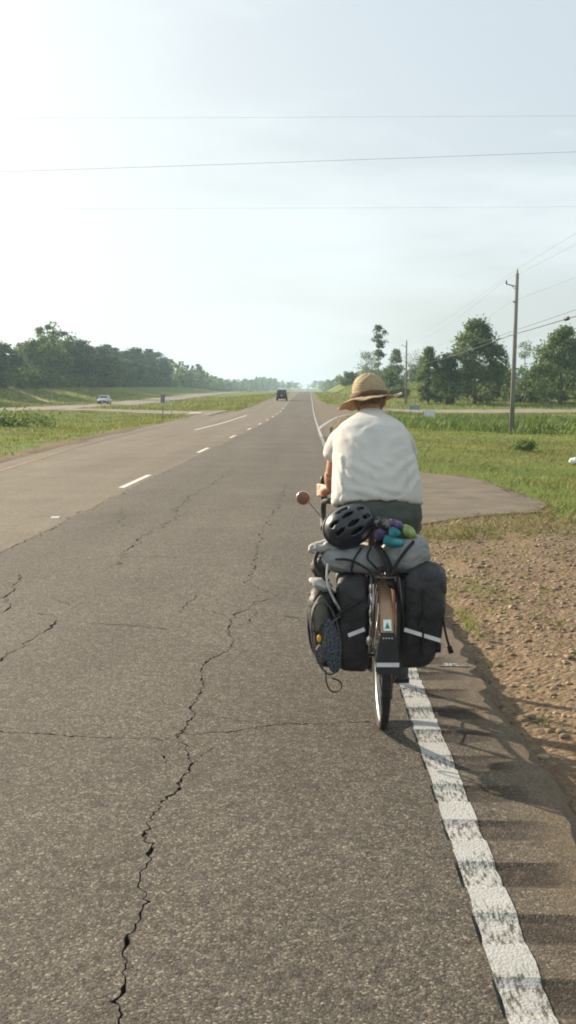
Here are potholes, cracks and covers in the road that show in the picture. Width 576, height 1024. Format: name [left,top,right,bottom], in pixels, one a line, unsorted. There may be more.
crack [0,483,370,1024]
